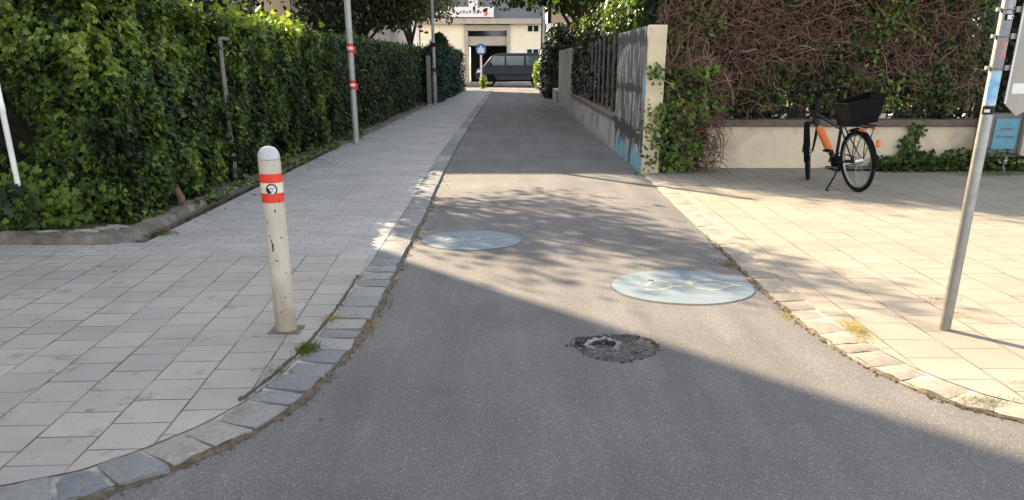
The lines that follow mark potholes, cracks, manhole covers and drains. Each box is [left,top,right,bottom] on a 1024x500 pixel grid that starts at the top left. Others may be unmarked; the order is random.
pothole [565,333,661,363]
